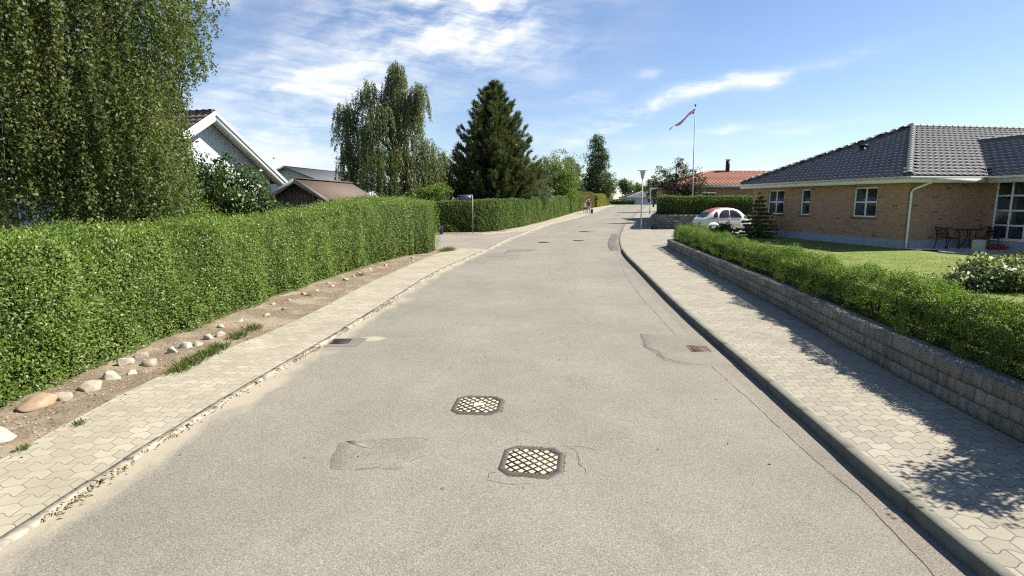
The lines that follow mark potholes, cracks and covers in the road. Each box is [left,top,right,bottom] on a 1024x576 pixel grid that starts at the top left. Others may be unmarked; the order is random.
drain grate [326,338,367,346]
